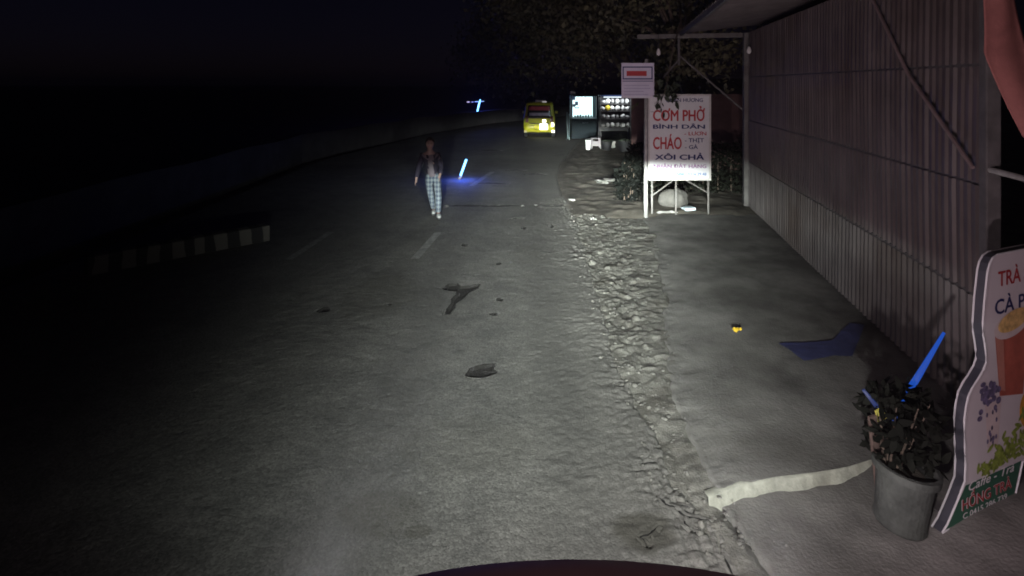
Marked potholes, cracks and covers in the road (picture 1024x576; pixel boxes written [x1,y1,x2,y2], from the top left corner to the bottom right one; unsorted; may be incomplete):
pothole [463,363,500,380]
crack [634,496,739,576]
pothole [441,283,482,315]
